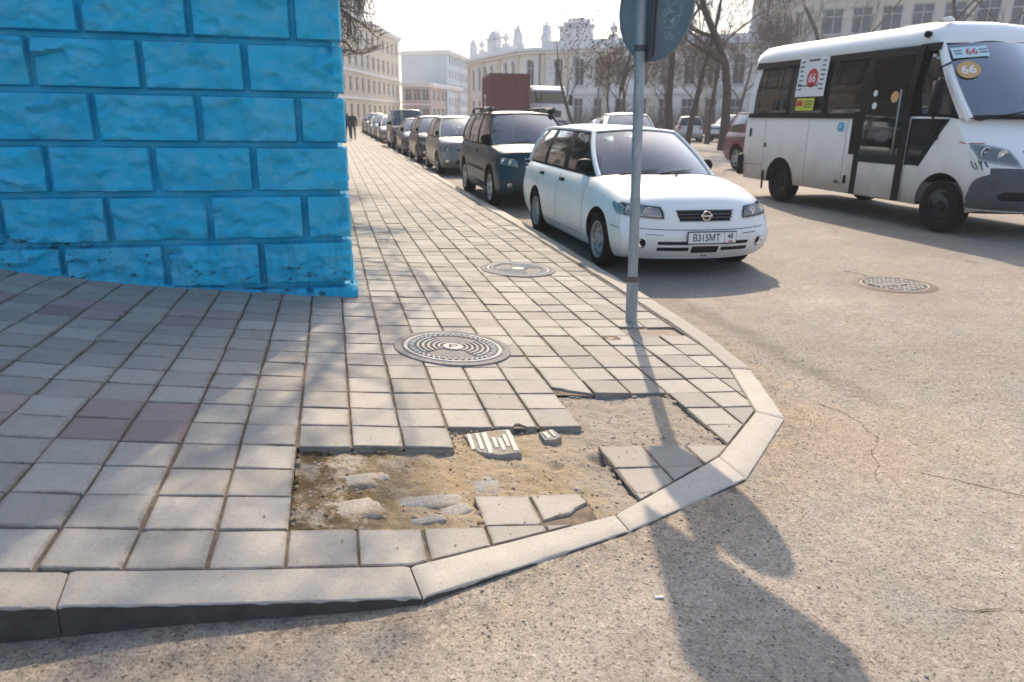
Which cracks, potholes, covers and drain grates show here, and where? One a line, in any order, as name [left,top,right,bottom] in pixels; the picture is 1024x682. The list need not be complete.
pothole [288,394,723,532]
manhole cover [850,276,939,294]
manhole cover [481,261,556,278]
crack [922,473,1023,496]
manhole cover [394,331,511,368]
